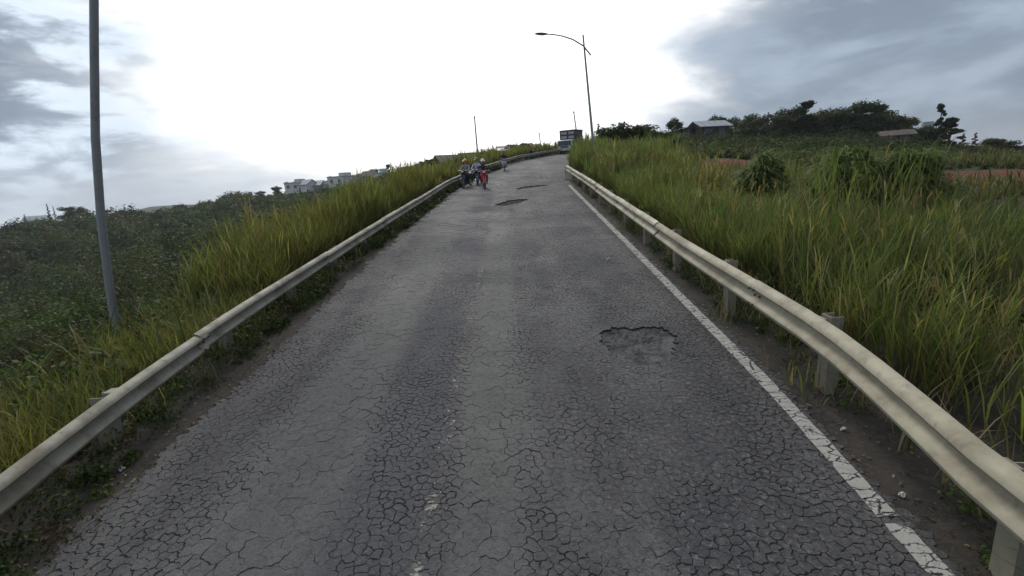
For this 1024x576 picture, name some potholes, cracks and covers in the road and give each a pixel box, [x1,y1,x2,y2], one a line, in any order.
crack [302,243,959,576]
pothole [599,327,679,366]
crack [45,248,451,576]
crack [391,173,751,370]
